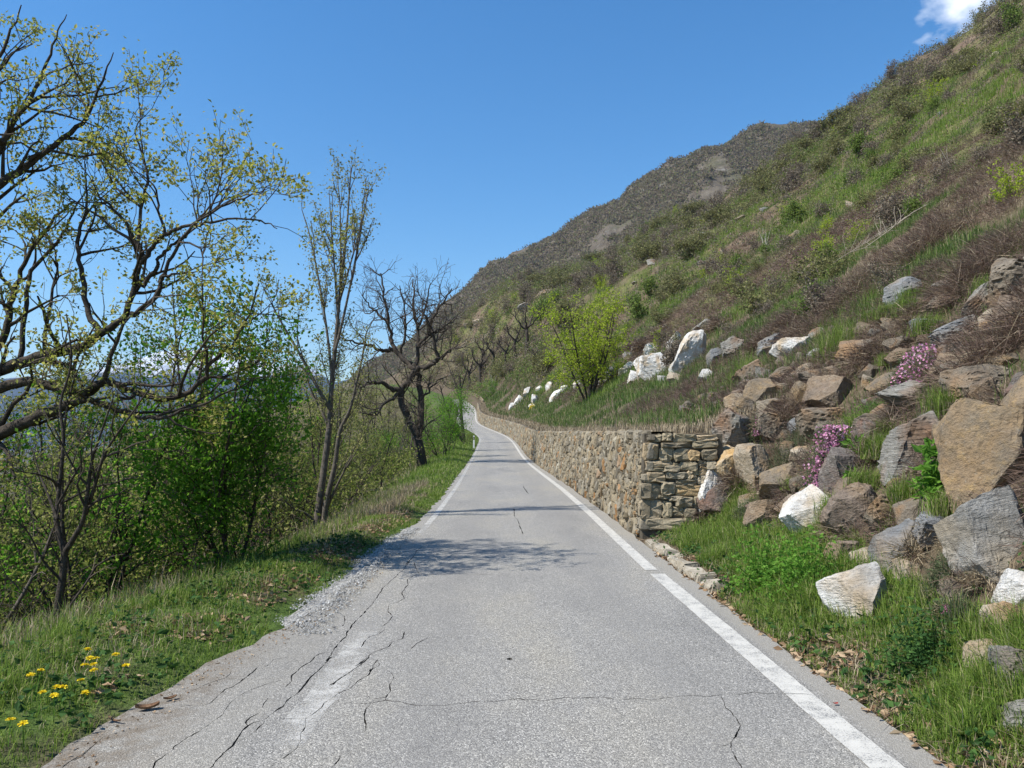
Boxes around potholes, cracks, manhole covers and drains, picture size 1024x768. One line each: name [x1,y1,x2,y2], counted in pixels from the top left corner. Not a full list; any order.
crack [153,548,766,768]
